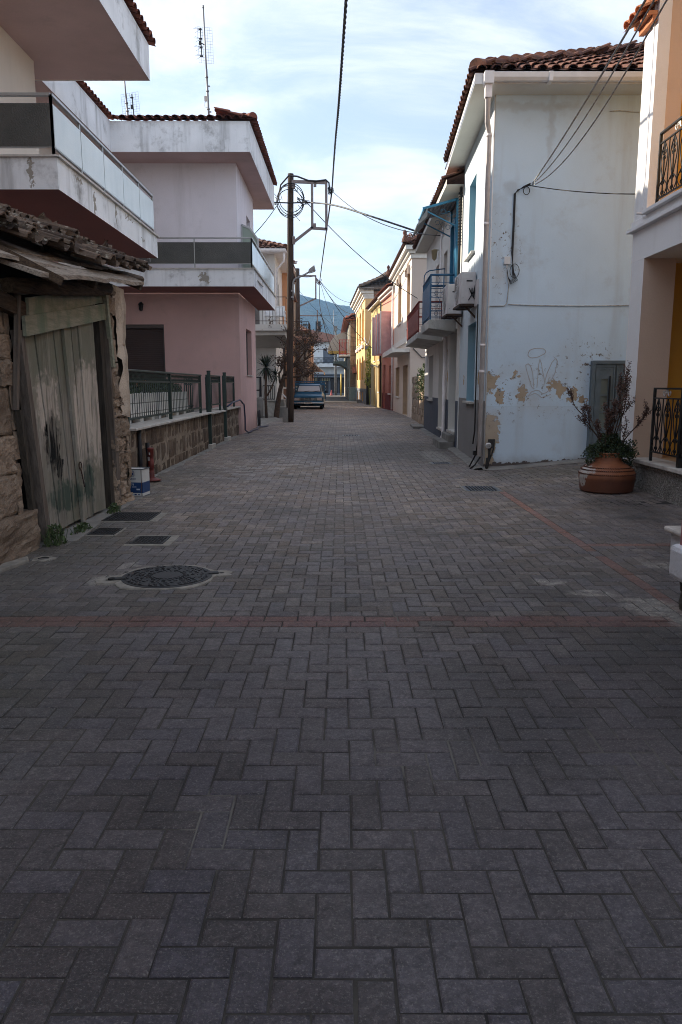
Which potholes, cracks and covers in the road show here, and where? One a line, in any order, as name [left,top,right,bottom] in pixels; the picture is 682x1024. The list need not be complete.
manhole cover [95,565,233,591]
